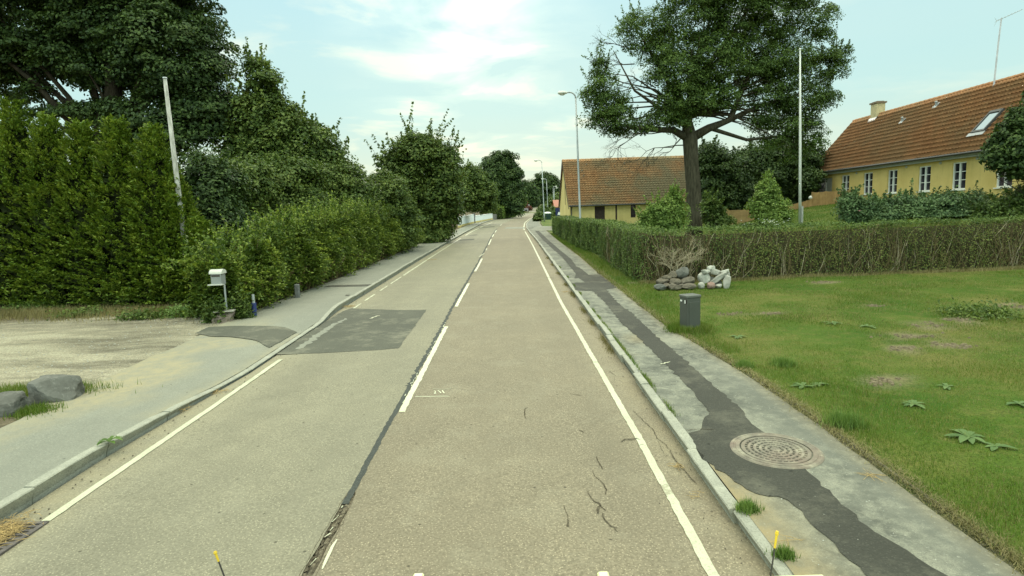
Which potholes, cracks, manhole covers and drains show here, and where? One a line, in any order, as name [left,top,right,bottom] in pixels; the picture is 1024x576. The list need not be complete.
drain grate [0,521,49,556]
crack [621,412,695,482]
manhole cover [730,433,825,469]
crack [588,456,618,532]
